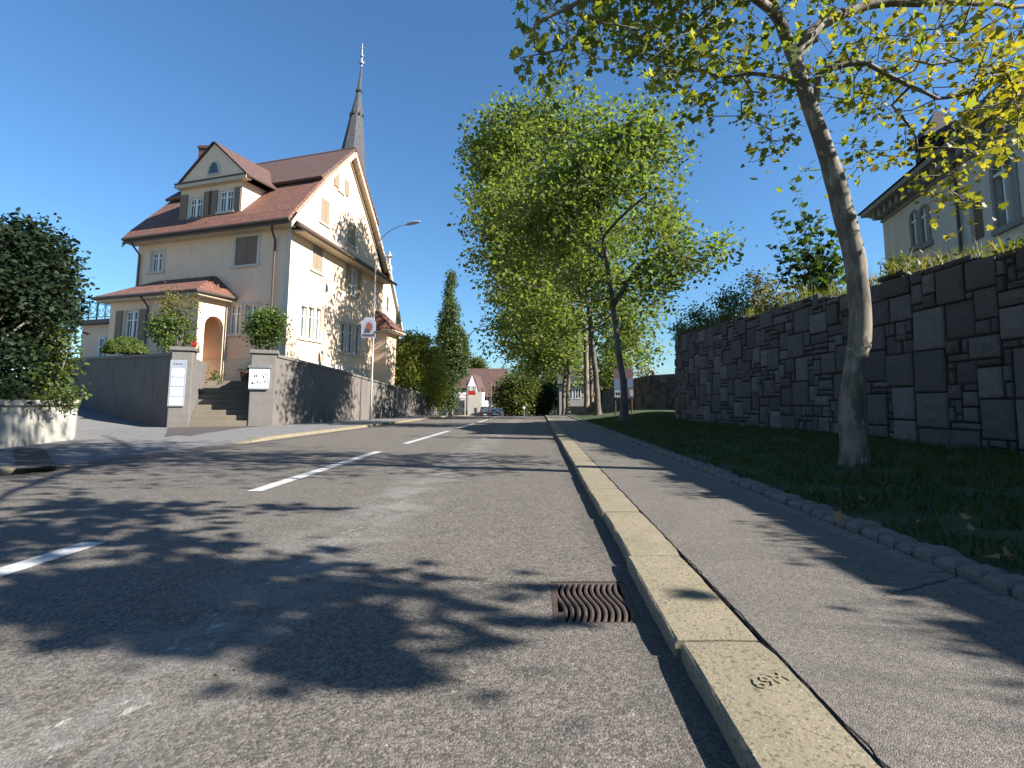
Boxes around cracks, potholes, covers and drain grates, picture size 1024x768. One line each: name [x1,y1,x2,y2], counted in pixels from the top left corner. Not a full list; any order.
crack [883,576,957,596]
drain grate [550,581,643,623]
